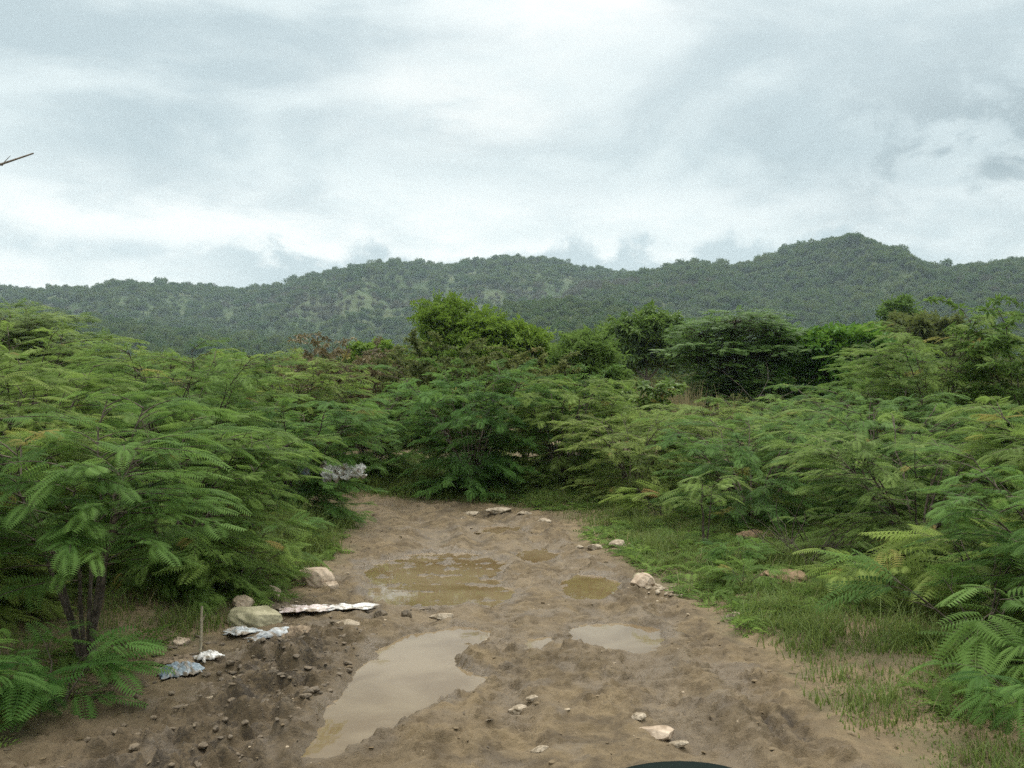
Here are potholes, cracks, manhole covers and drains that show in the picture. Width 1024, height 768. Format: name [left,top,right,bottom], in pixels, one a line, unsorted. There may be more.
pothole [351,543,531,611]
pothole [290,619,509,764]
pothole [548,569,631,605]
pothole [504,547,567,565]
pothole [554,614,680,660]
